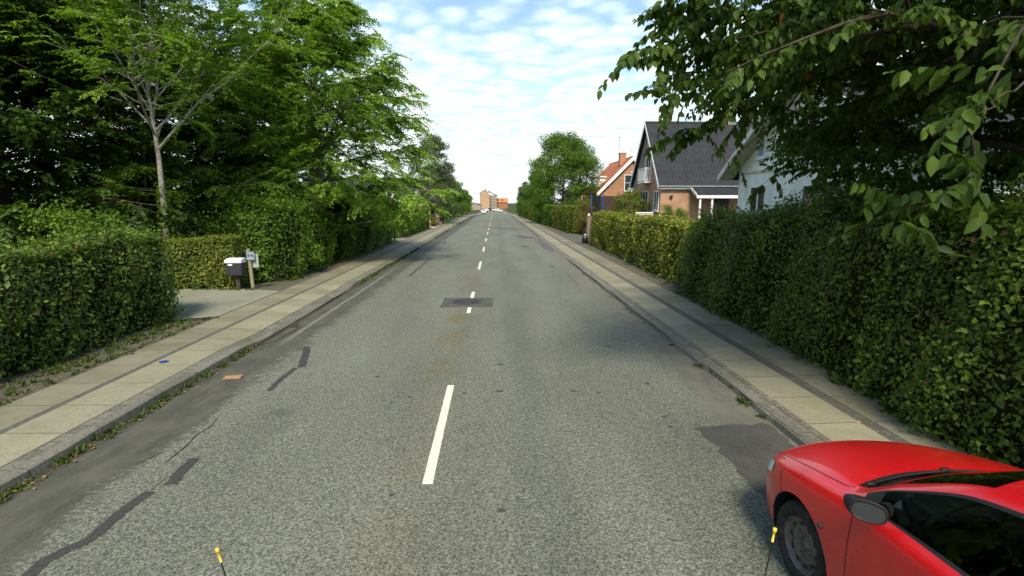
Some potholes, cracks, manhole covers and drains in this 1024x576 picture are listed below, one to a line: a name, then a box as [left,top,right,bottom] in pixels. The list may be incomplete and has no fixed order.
crack [139,418,218,487]
